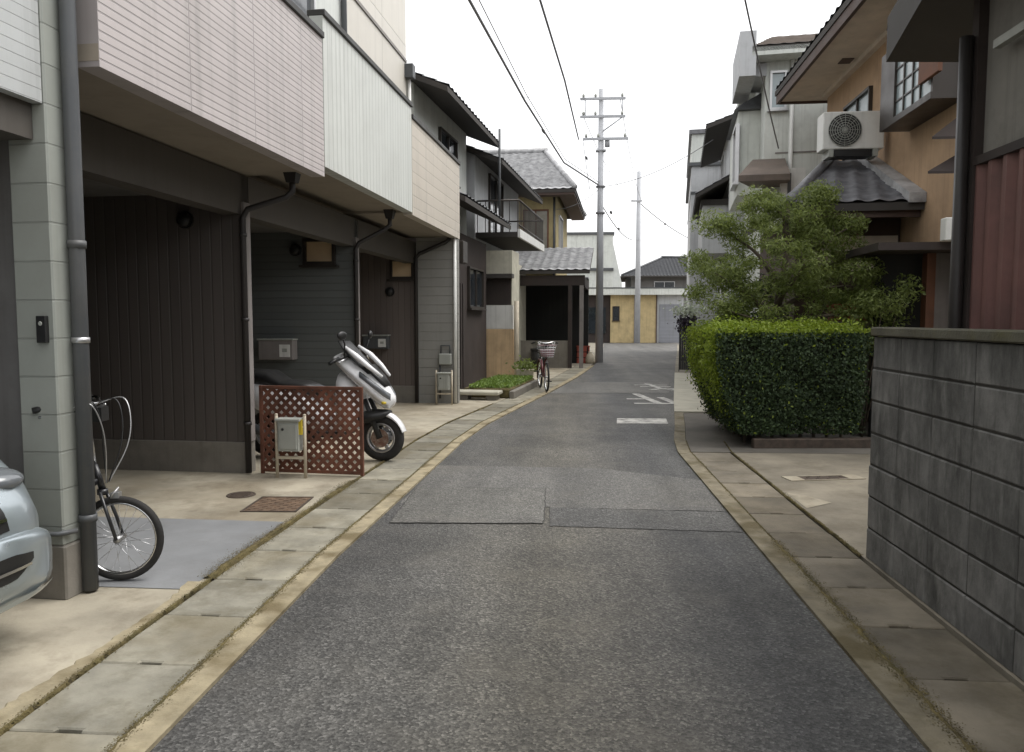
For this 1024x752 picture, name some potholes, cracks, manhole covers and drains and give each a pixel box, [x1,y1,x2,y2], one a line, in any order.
manhole cover [240,496,314,512]
